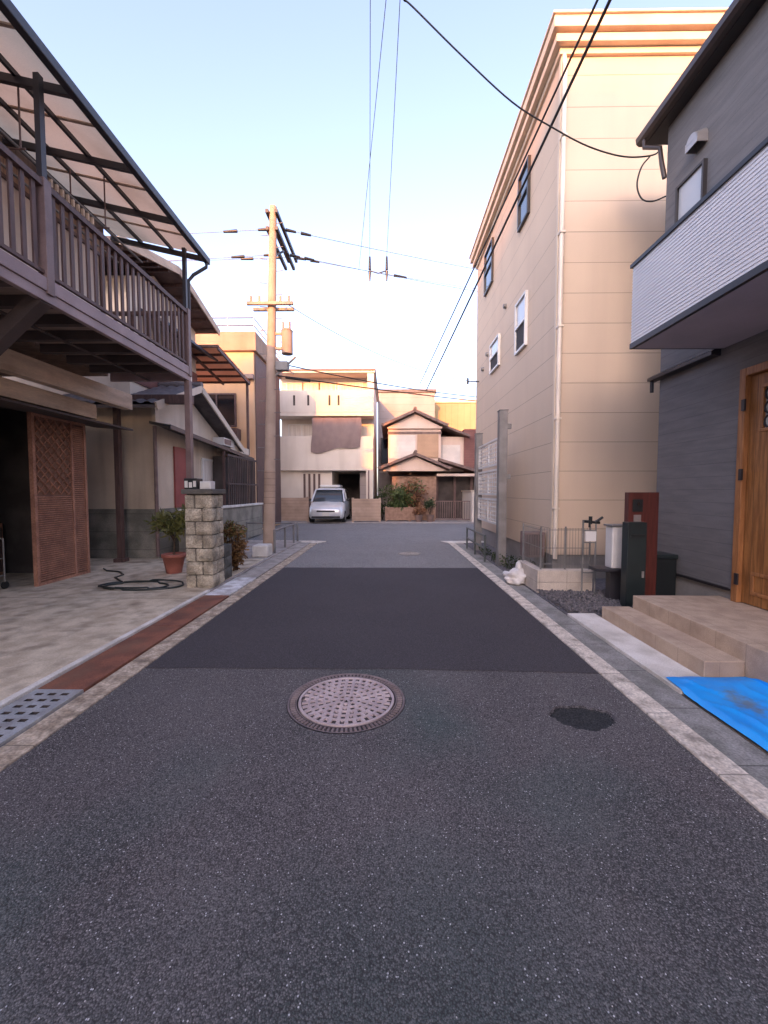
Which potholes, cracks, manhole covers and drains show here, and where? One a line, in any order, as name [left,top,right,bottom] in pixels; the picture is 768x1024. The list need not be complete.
drain grate [0,689,84,748]
manhole cover [286,673,406,733]
